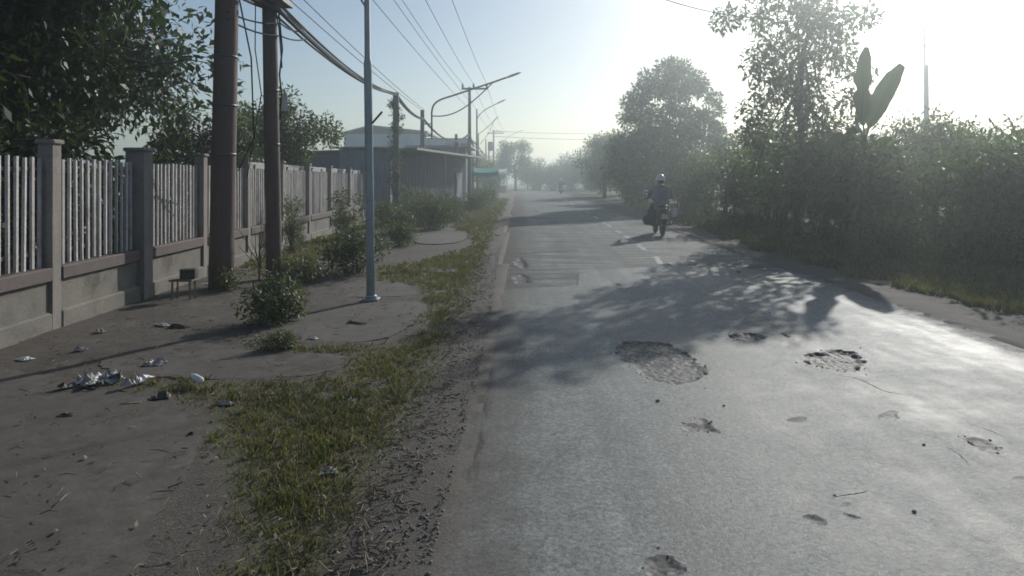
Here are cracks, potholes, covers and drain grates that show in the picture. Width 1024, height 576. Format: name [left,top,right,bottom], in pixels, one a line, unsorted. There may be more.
pothole [802,514,828,527]
pothole [965,437,1002,454]
pothole [878,410,900,420]
pothole [727,332,769,341]
pothole [678,418,721,434]
pothole [642,554,687,576]
pothole [802,349,867,373]
pothole [614,341,709,385]
pothole [511,257,530,268]
pothole [511,274,532,284]
